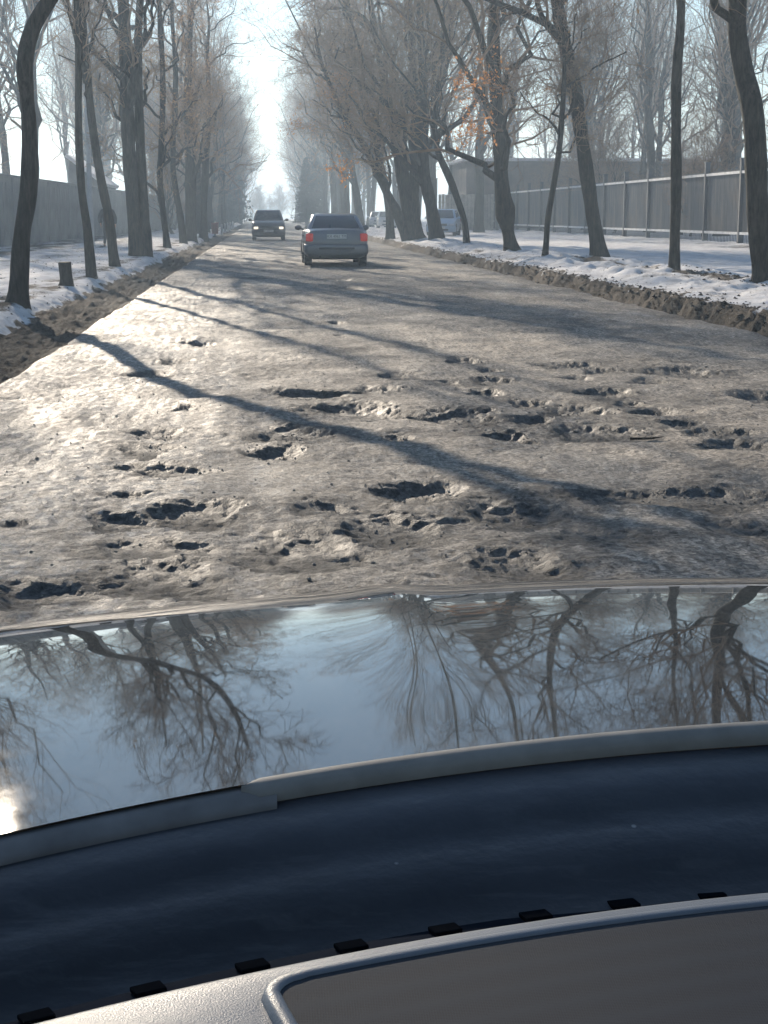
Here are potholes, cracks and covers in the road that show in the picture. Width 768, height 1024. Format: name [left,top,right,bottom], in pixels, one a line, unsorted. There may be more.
pothole [566,387,635,398]
pothole [470,429,539,445]
pothole [237,443,312,461]
pothole [688,436,768,452]
pothole [626,406,685,416]
pothole [362,479,471,505]
pothole [452,542,586,582]
pothole [141,497,252,533]
pothole [255,388,350,401]
pothole [63,536,232,561]
pothole [726,388,768,404]
pothole [411,405,504,429]
